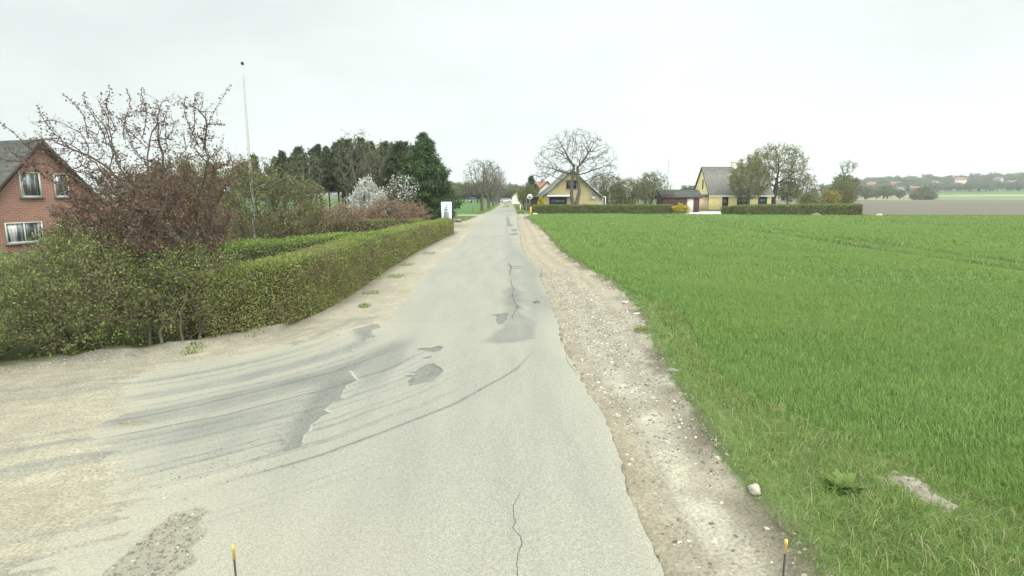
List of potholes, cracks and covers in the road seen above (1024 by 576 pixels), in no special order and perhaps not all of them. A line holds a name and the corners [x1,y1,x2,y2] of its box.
crack [497,263,546,331]
pothole [101,506,212,576]
crack [512,492,522,576]
